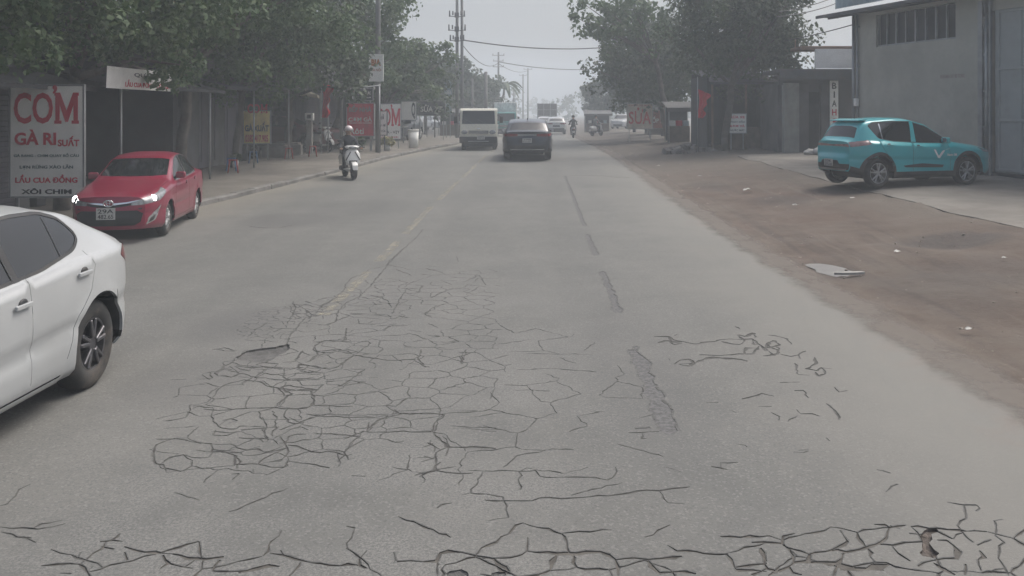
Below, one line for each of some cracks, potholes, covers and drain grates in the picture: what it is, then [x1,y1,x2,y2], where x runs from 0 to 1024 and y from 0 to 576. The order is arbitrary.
crack [947,502,1010,576]
pothole [236,344,290,363]
crack [654,326,848,422]
crack [0,229,690,576]
pothole [920,529,939,558]
